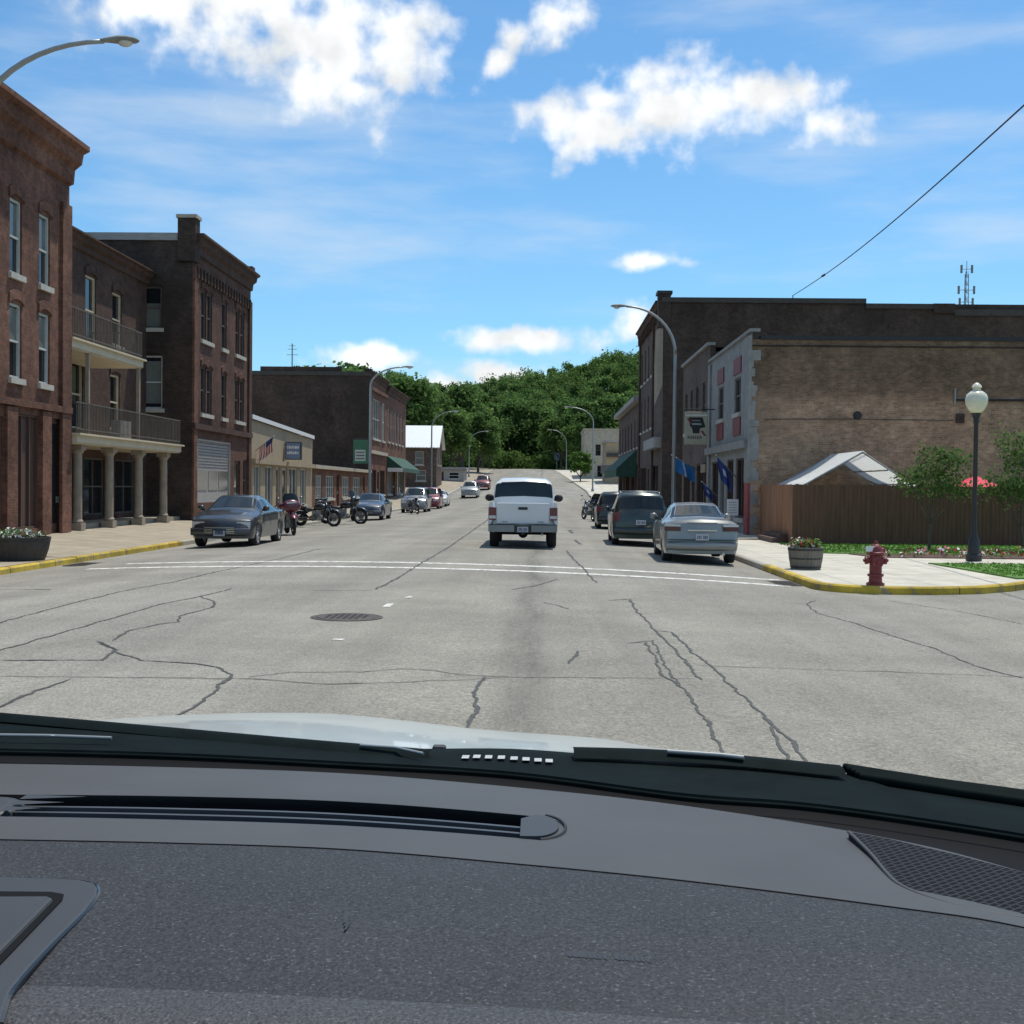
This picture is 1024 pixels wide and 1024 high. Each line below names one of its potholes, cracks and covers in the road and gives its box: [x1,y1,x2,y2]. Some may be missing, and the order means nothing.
manhole cover [310,613,383,621]
crack [375,520,488,589]
crack [566,530,597,583]
crack [0,548,1023,762]
